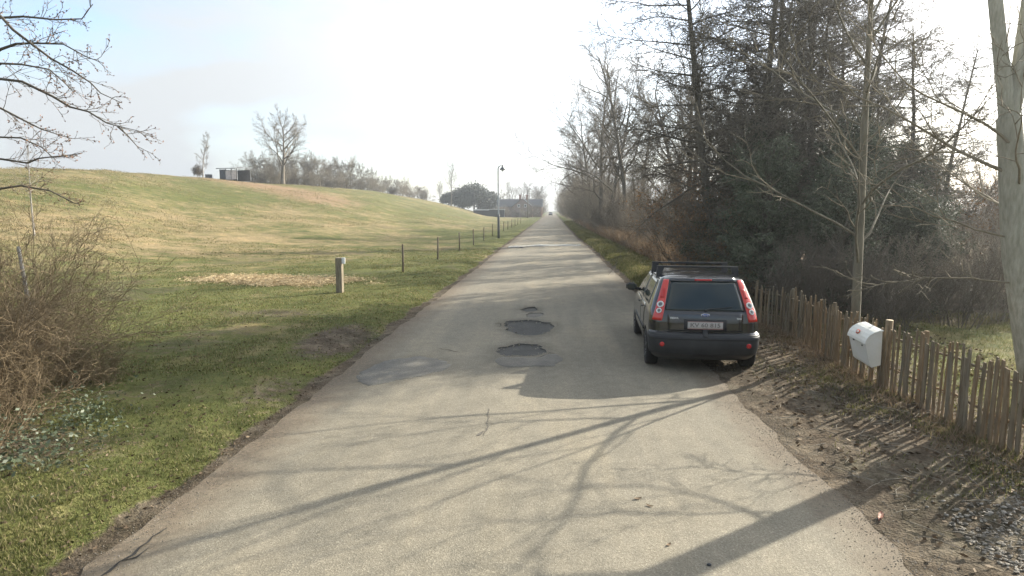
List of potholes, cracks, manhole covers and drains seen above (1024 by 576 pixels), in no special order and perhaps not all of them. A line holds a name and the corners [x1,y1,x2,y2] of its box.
pothole [504,320,554,335]
pothole [496,344,546,356]
